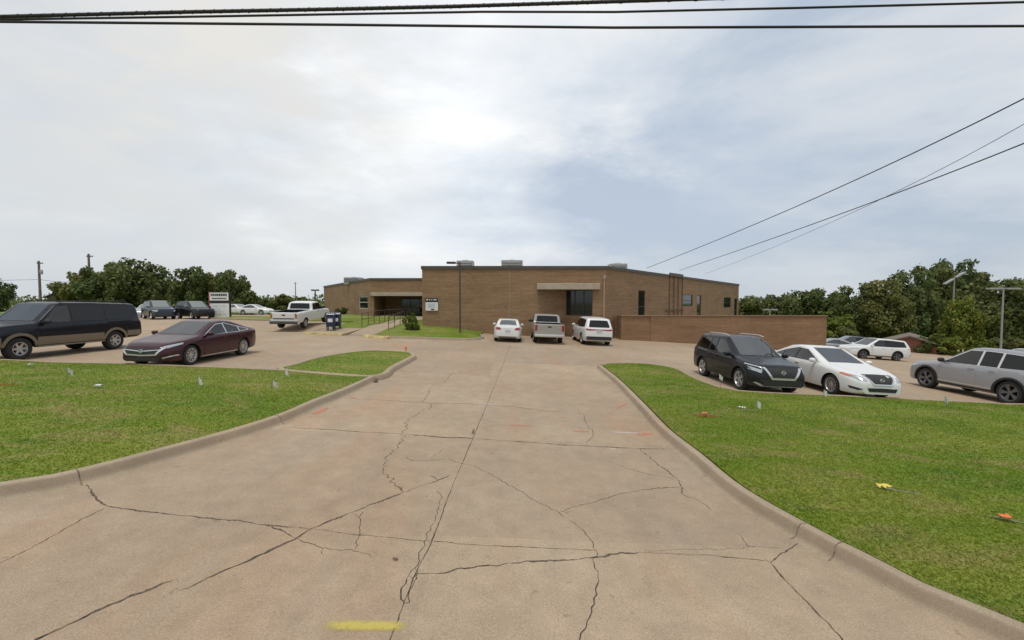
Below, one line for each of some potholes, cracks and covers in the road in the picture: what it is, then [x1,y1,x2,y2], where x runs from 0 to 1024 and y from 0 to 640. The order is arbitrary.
crack [665,535,843,640]
crack [0,368,711,640]
